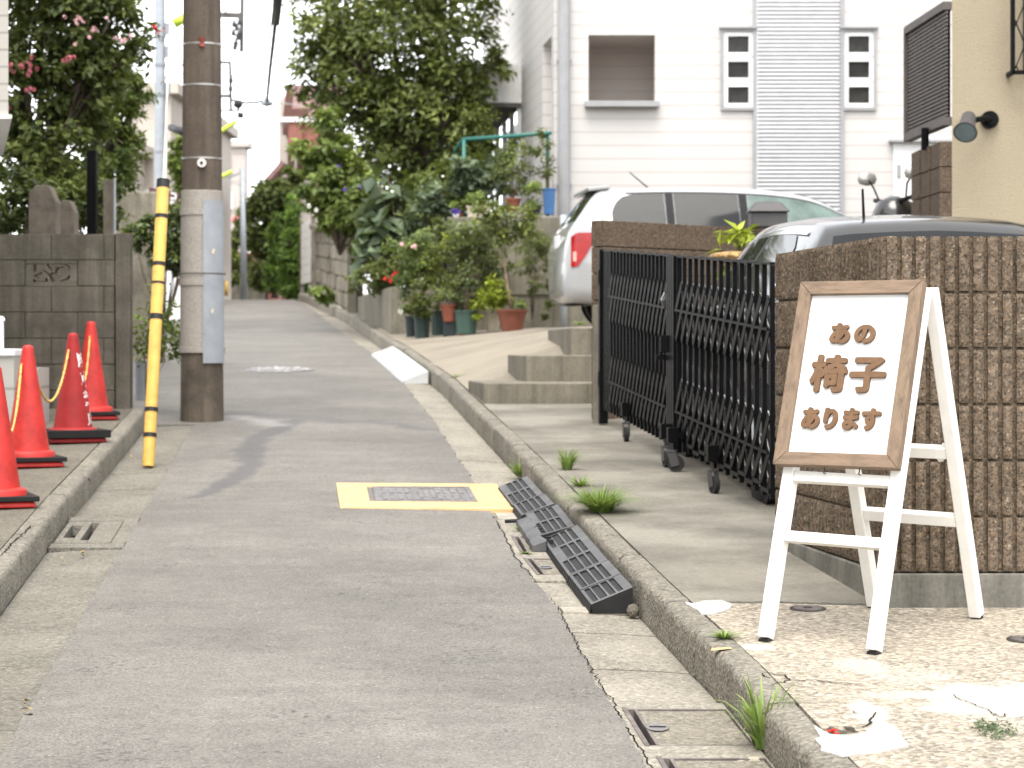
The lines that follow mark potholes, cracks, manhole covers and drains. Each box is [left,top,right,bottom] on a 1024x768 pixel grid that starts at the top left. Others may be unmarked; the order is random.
manhole cover [1006,635,1024,644]
crack [762,672,863,686]
manhole cover [336,483,513,513]
crack [496,518,537,582]
